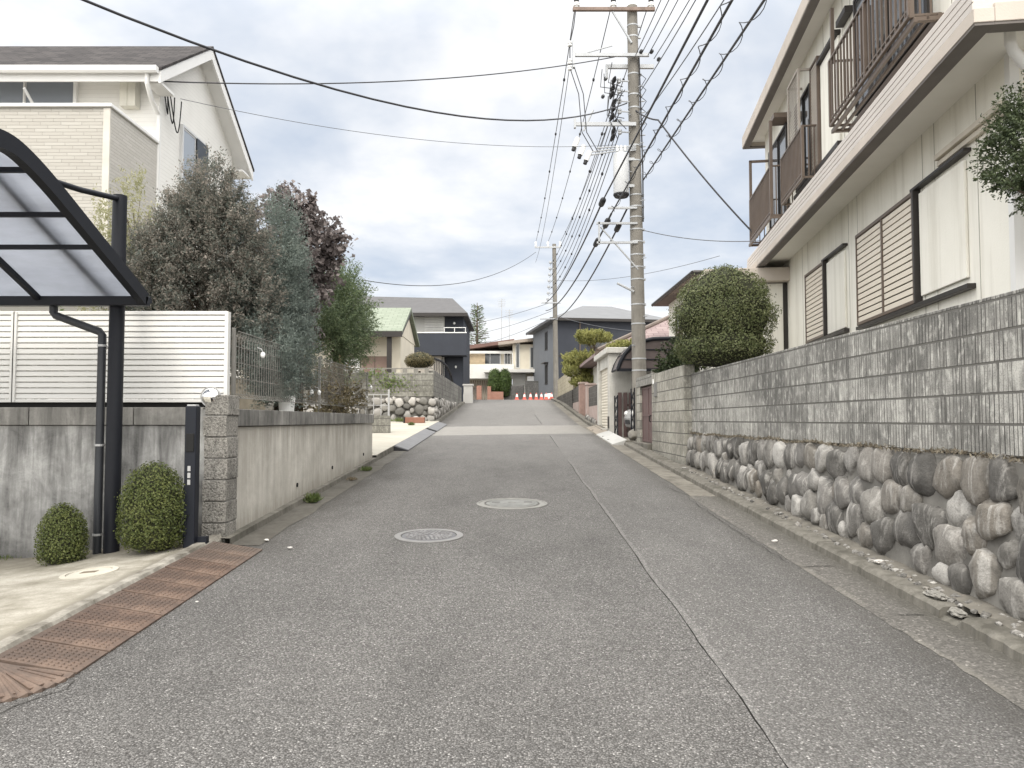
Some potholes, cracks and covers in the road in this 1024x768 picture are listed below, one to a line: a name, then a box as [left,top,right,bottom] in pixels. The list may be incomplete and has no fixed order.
manhole cover [394,529,463,543]
manhole cover [59,566,119,580]
manhole cover [476,498,548,510]
